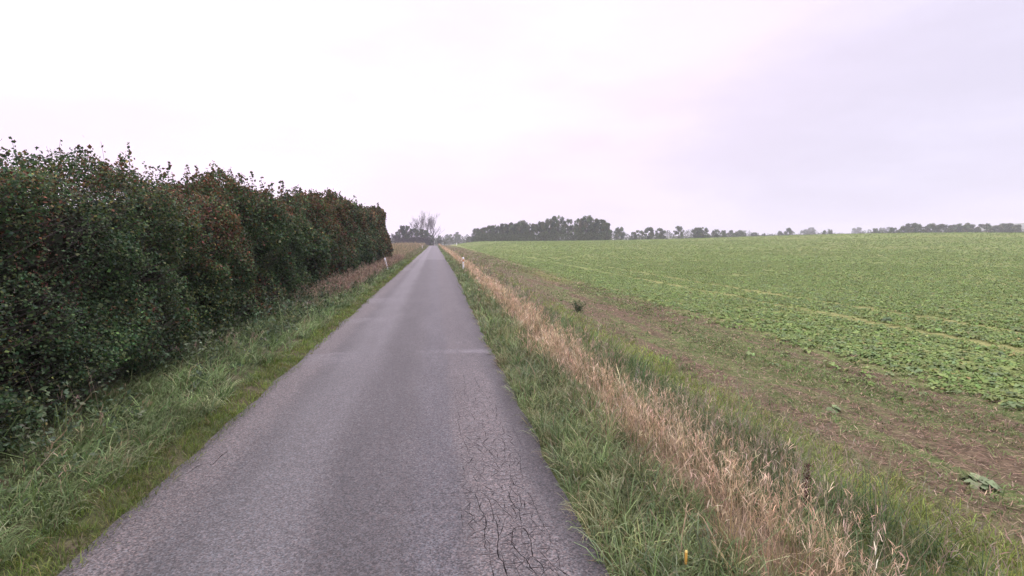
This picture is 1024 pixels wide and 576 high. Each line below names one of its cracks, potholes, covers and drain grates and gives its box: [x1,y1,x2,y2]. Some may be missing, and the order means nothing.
crack [454,377,569,576]
